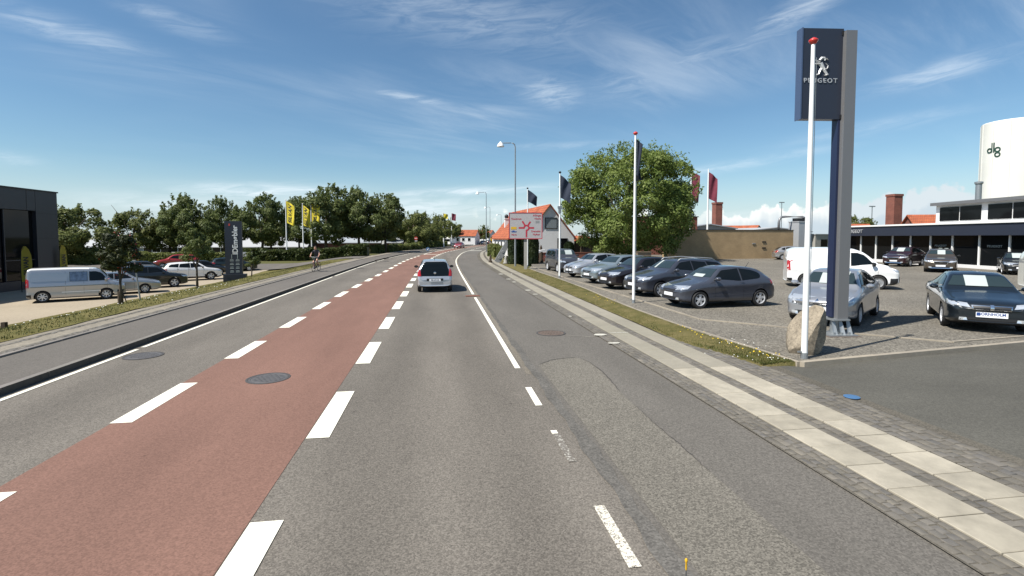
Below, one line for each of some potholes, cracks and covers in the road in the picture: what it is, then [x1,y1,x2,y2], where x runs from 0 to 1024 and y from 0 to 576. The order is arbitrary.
manhole cover [245,372,291,384]
manhole cover [121,352,164,360]
